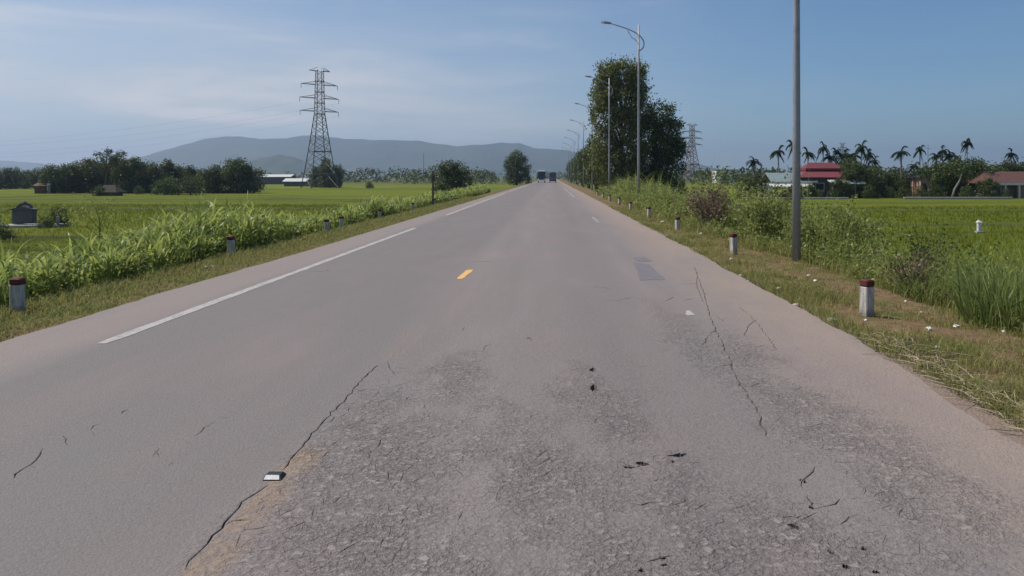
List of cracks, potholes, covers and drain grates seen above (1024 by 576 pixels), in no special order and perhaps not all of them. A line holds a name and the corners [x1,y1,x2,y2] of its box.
crack [184,327,504,576]
crack [0,425,44,478]
crack [526,267,945,576]
